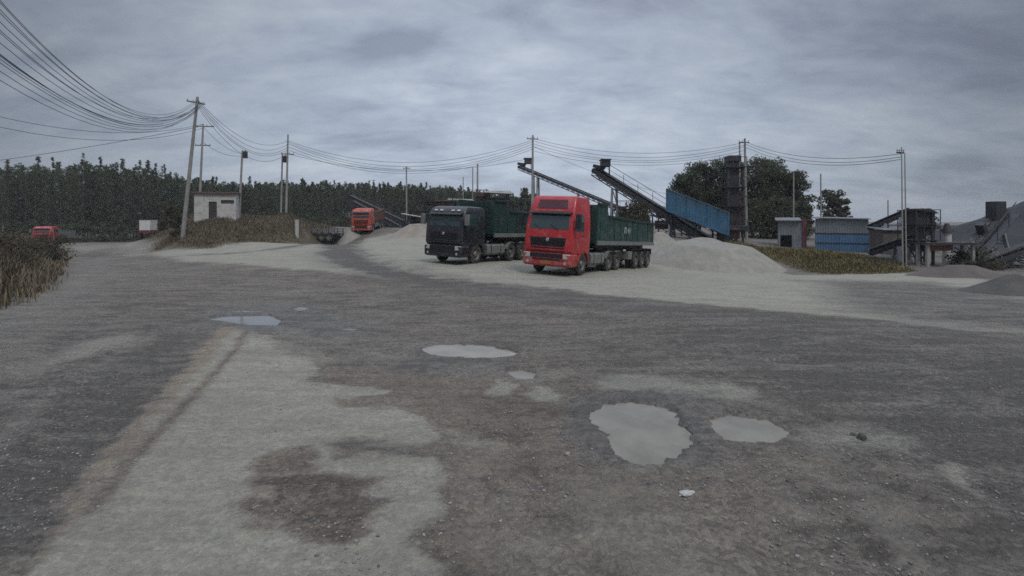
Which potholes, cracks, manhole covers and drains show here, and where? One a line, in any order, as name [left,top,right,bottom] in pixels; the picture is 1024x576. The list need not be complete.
pothole [573,393,716,476]
pothole [687,406,816,453]
pothole [410,340,531,360]
